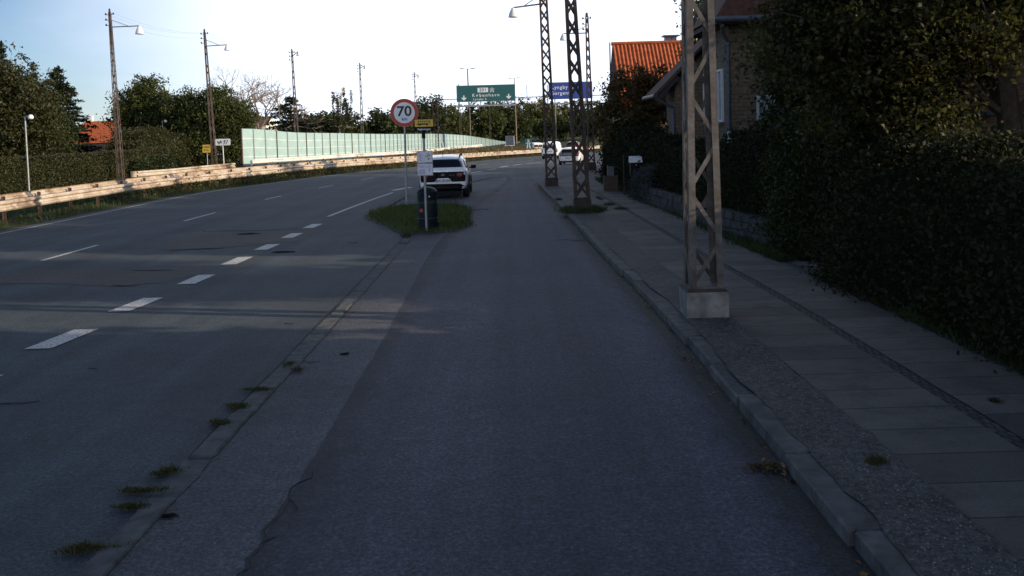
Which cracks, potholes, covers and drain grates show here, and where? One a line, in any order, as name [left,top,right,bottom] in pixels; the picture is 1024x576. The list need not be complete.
crack [236,472,313,576]
